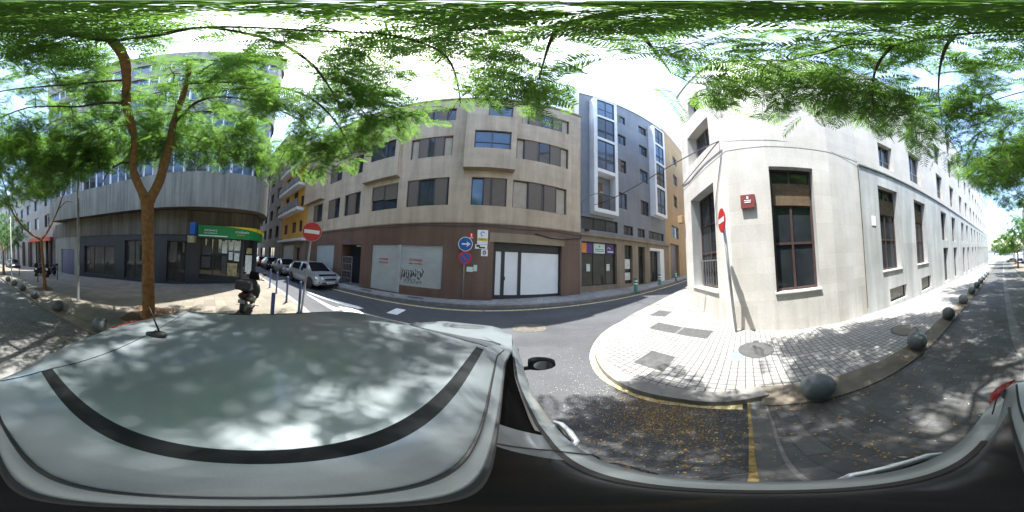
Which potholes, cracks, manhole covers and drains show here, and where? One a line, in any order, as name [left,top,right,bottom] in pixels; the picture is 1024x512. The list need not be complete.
manhole cover [634,351,675,371]
manhole cover [649,322,683,334]
manhole cover [677,327,713,339]
manhole cover [890,325,919,336]
manhole cover [738,341,774,358]
